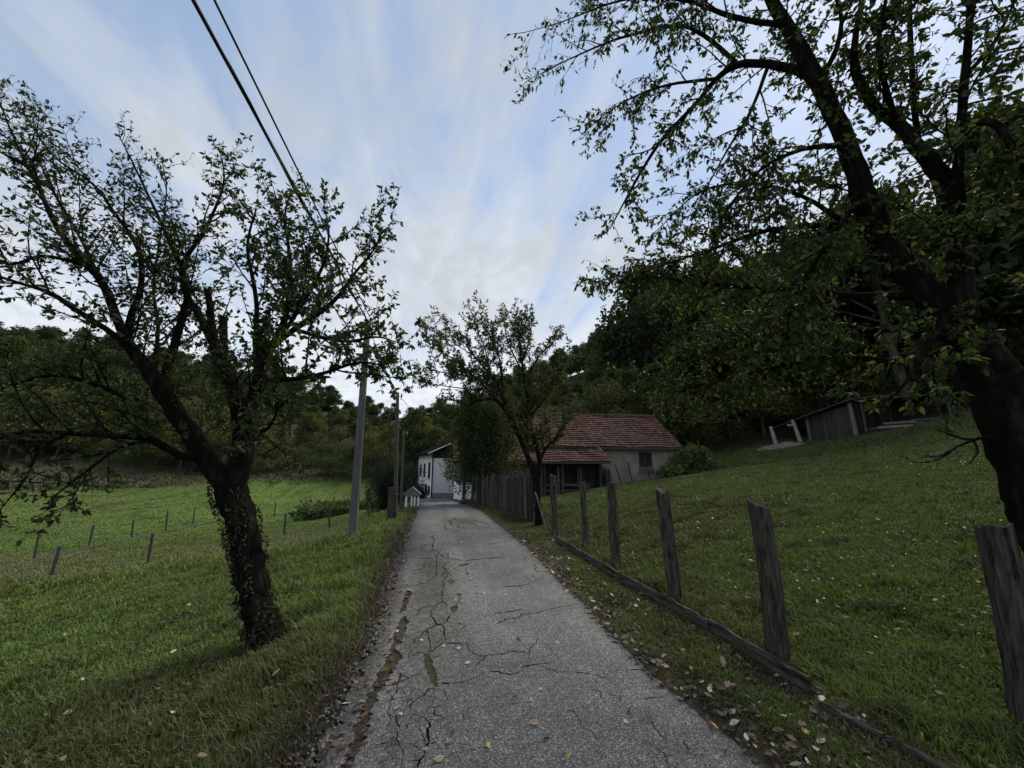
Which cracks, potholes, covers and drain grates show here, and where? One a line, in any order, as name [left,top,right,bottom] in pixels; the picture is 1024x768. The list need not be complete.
crack [377,516,646,768]
crack [623,696,674,768]
